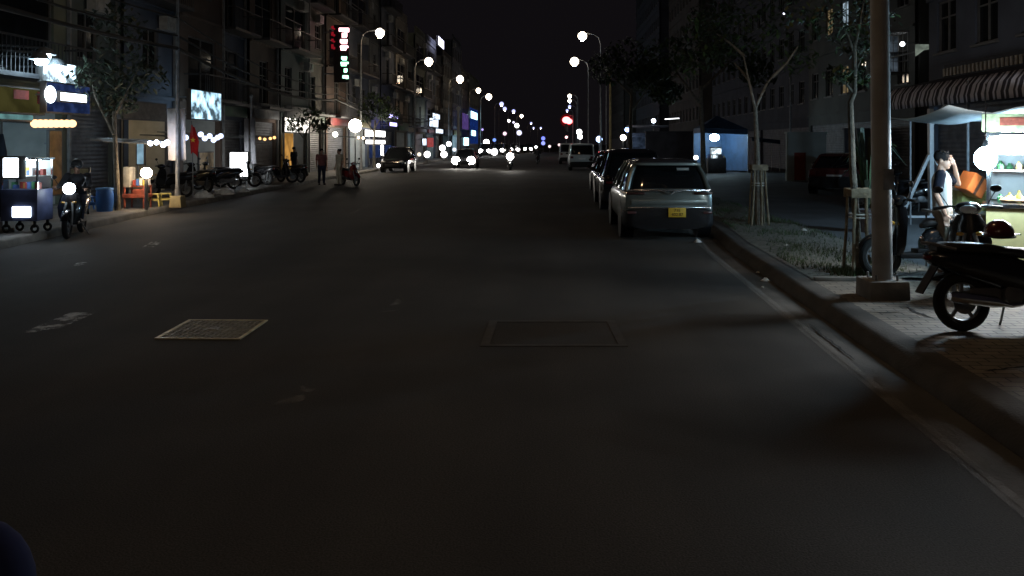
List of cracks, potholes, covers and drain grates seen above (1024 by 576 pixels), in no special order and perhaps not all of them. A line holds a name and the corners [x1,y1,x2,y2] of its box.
crack [810,307,932,360]
manhole cover [480,320,628,346]
